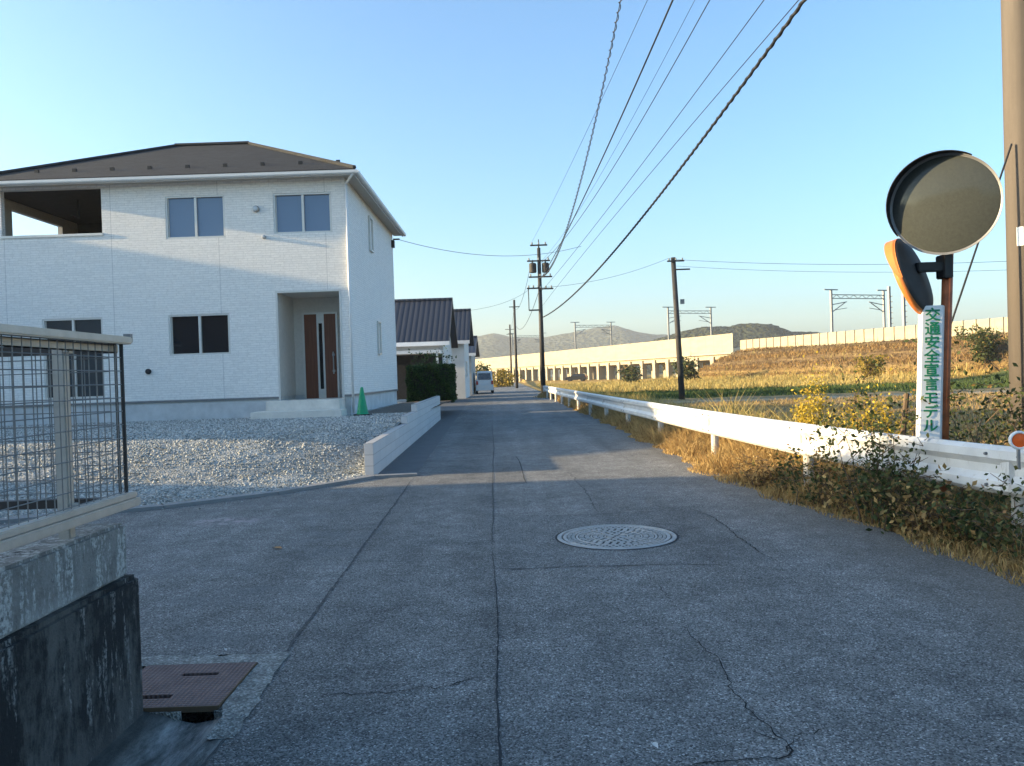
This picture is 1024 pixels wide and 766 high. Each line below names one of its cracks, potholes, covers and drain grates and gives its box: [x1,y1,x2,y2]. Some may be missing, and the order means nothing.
crack [326,677,477,695]
crack [649,574,829,766]
crack [544,473,773,559]
manhole cover [555,524,679,550]
